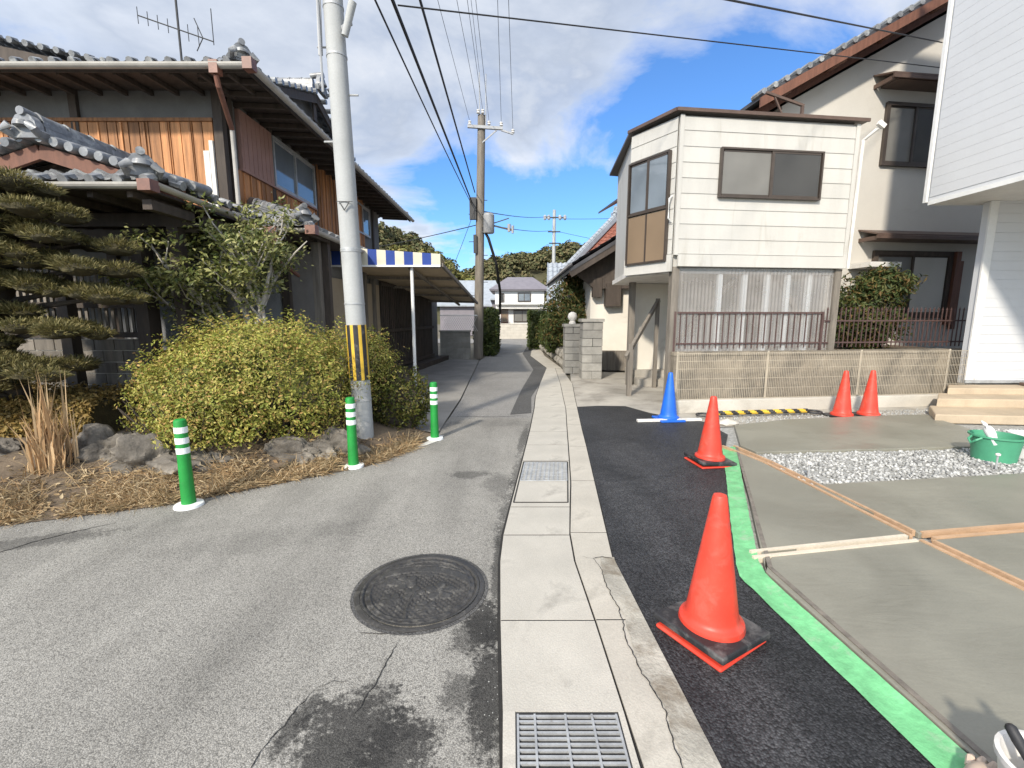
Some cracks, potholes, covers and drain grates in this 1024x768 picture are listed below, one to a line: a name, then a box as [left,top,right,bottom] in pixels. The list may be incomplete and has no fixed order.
manhole cover [350,554,488,636]
drain grate [513,461,568,503]
crack [251,680,344,768]
drain grate [515,712,633,768]
crack [353,632,413,715]
crack [586,557,683,768]
